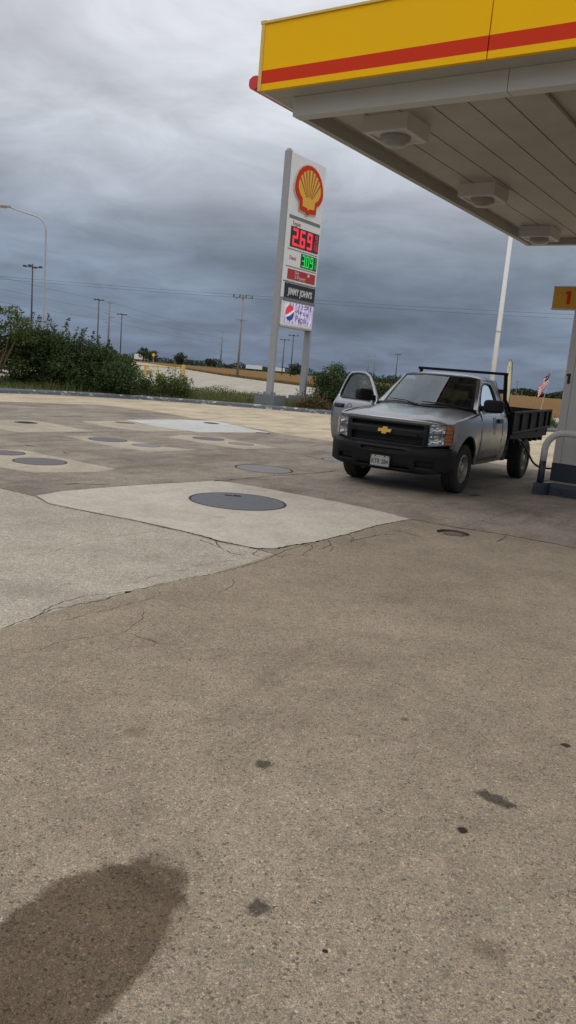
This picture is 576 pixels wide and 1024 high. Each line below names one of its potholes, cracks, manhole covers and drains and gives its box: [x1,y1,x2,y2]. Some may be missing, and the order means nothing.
crack [5,489,416,643]
manhole cover [189,492,287,511]
manhole cover [235,464,293,473]
manhole cover [437,529,470,537]
